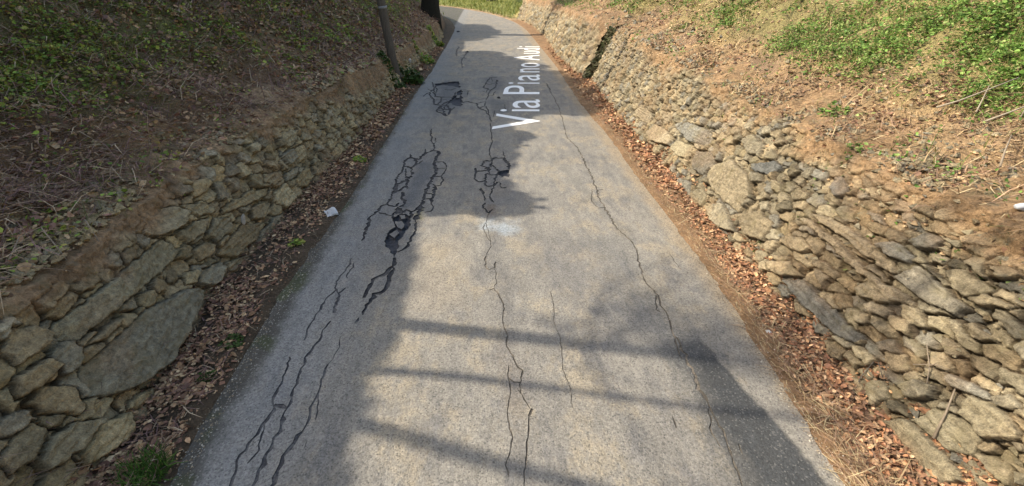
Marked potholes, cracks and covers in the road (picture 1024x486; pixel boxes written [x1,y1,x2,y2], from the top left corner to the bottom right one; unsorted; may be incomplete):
crack [229,47,533,486]
crack [546,83,743,486]
